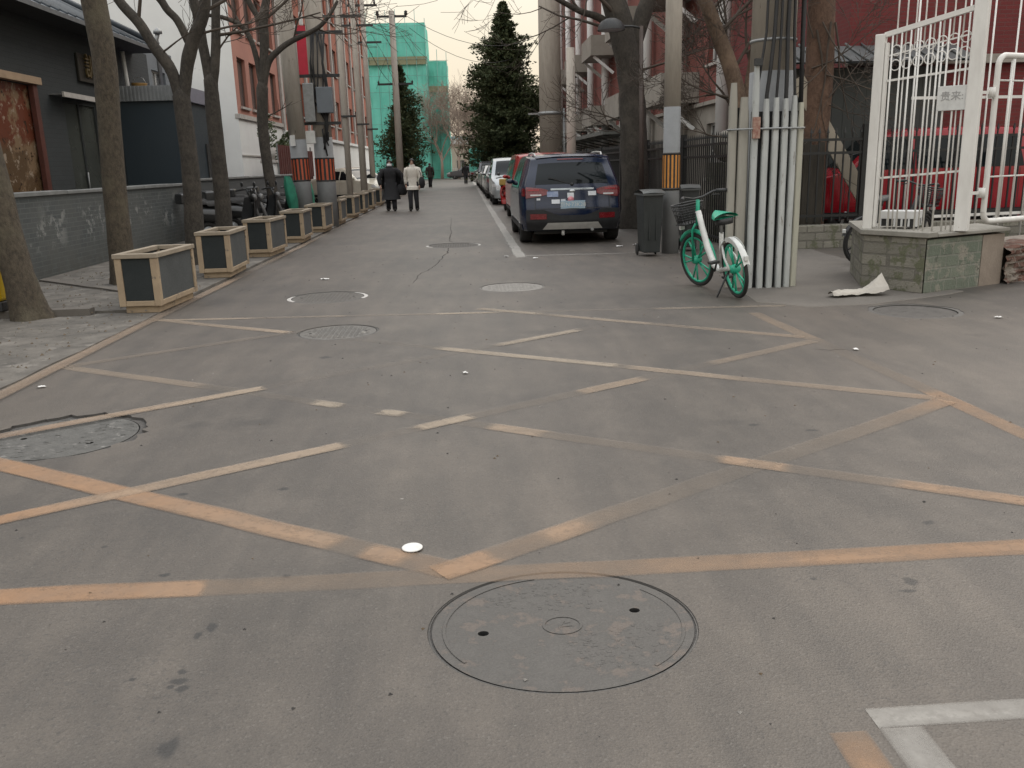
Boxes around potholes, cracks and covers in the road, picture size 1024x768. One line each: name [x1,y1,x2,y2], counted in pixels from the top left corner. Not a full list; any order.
manhole cover [480,283,545,292]
manhole cover [868,304,964,319]
manhole cover [287,291,368,303]
manhole cover [0,412,148,463]
manhole cover [297,324,379,340]
manhole cover [427,571,699,694]
